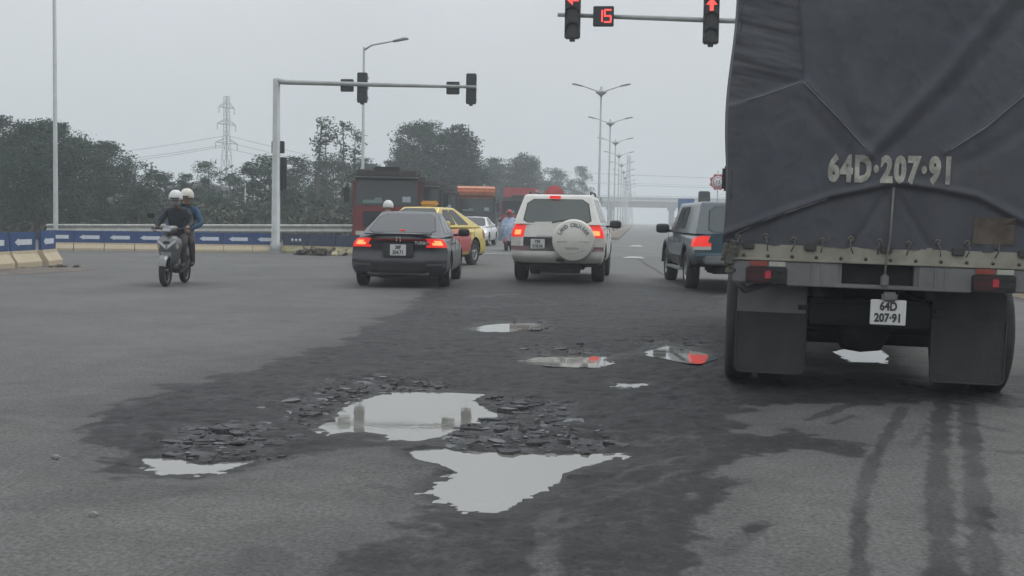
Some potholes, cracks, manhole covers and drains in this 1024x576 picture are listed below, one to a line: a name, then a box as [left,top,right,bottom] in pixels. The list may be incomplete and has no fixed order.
pothole [459,319,560,333]
pothole [819,345,904,364]
pothole [114,419,311,480]
pothole [383,442,646,519]
pothole [617,330,724,367]
pothole [510,342,631,369]
pothole [601,377,667,390]
pothole [182,371,630,457]
